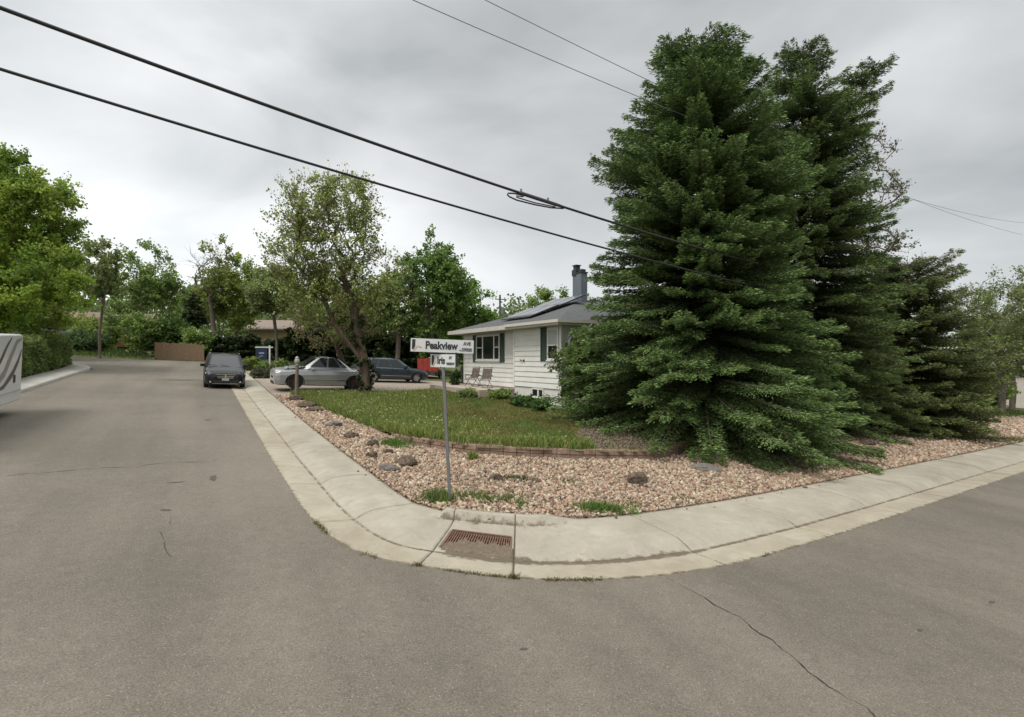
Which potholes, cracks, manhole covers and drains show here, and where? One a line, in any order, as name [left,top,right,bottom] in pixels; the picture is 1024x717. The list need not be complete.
drain grate [440,529,514,558]
crack [672,580,875,717]
